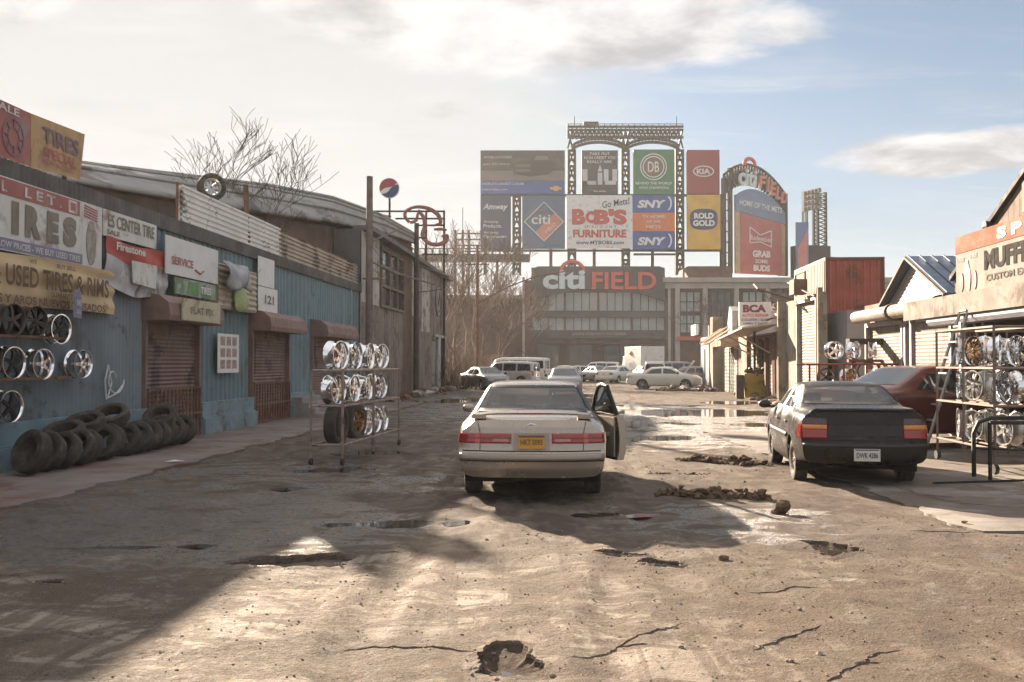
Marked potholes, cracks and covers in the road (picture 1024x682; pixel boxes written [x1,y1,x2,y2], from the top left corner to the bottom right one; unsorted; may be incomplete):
pothole [790,539,872,560]
pothole [631,557,690,568]
pothole [205,551,374,571]
crack [753,625,902,682]
crack [567,622,687,658]
pothole [466,637,559,682]
